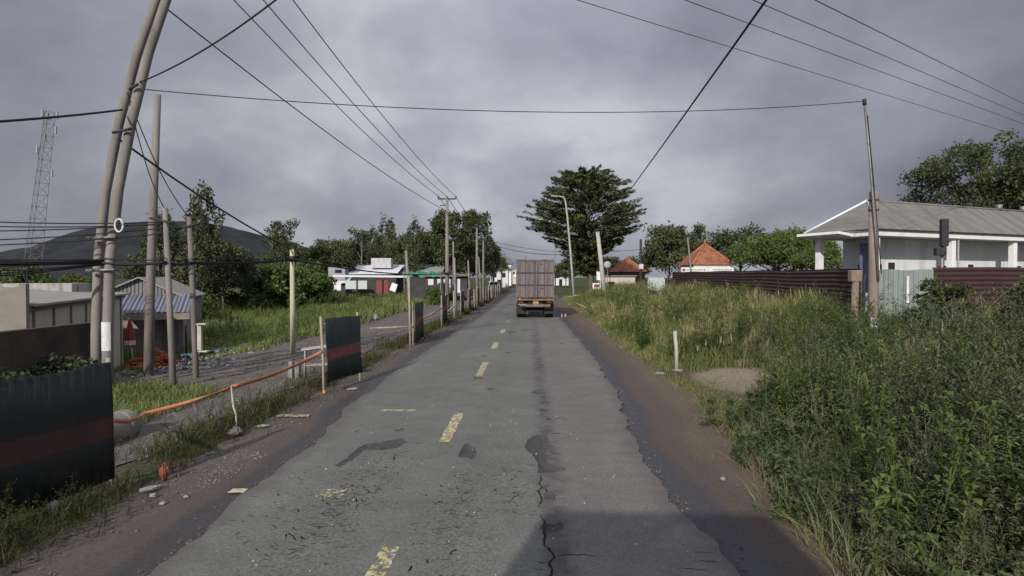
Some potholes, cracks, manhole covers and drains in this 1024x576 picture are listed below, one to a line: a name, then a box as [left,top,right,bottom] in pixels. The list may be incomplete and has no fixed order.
pothole [336,439,407,467]
pothole [459,443,477,459]
crack [408,453,596,576]
crack [220,448,430,567]
pothole [525,435,567,473]
